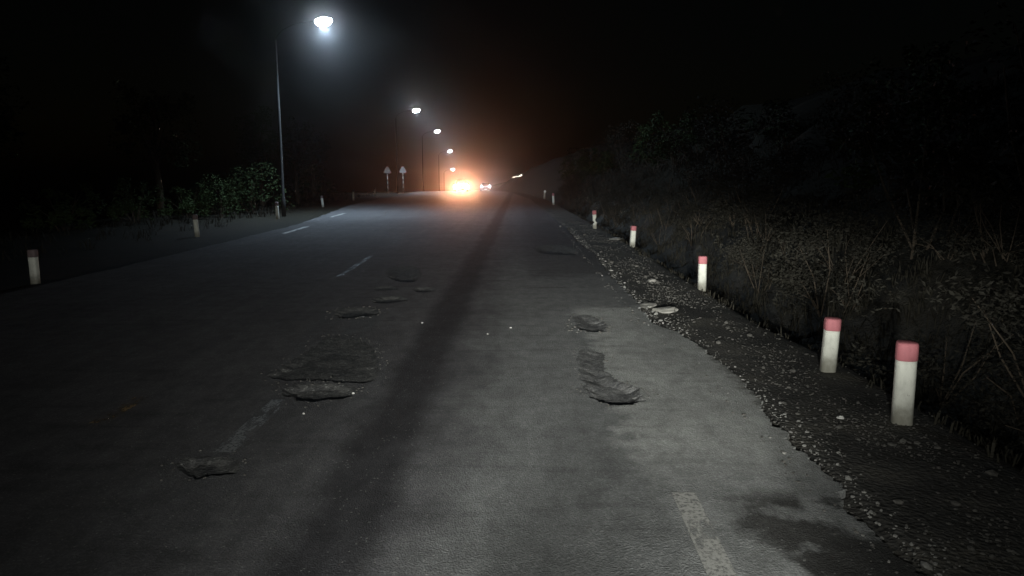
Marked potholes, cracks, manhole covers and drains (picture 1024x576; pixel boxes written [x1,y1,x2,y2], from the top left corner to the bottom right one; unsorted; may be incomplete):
pothole [281,382,356,402]
pothole [267,336,380,383]
pothole [175,456,240,480]
pothole [533,244,579,255]
pothole [576,349,646,406]
pothole [572,315,608,332]
pothole [385,266,422,282]
pothole [333,307,380,319]
